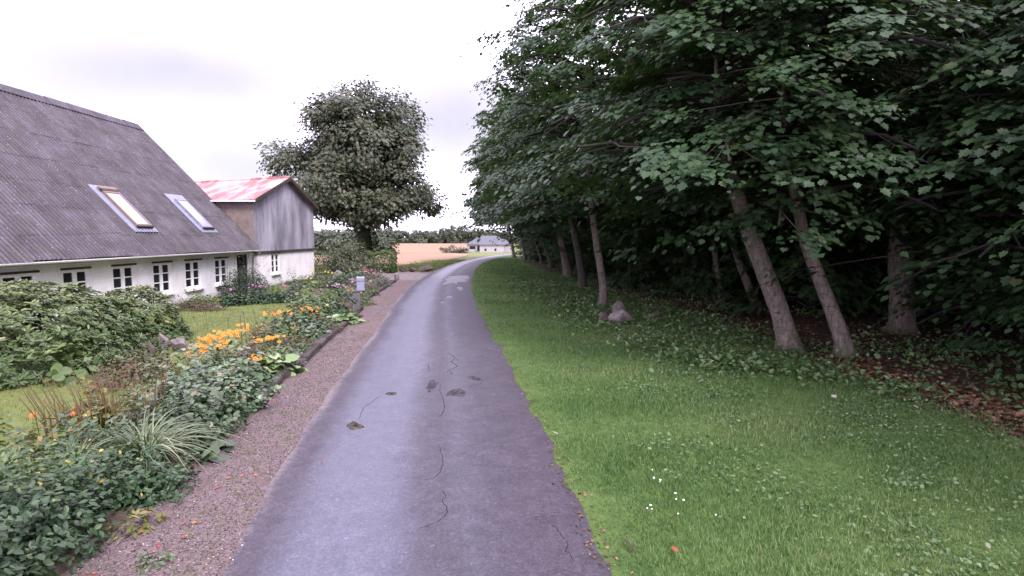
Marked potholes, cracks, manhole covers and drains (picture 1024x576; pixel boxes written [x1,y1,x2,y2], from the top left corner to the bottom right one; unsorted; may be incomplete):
crack [421,448,448,528]
pothole [446,388,466,396]
